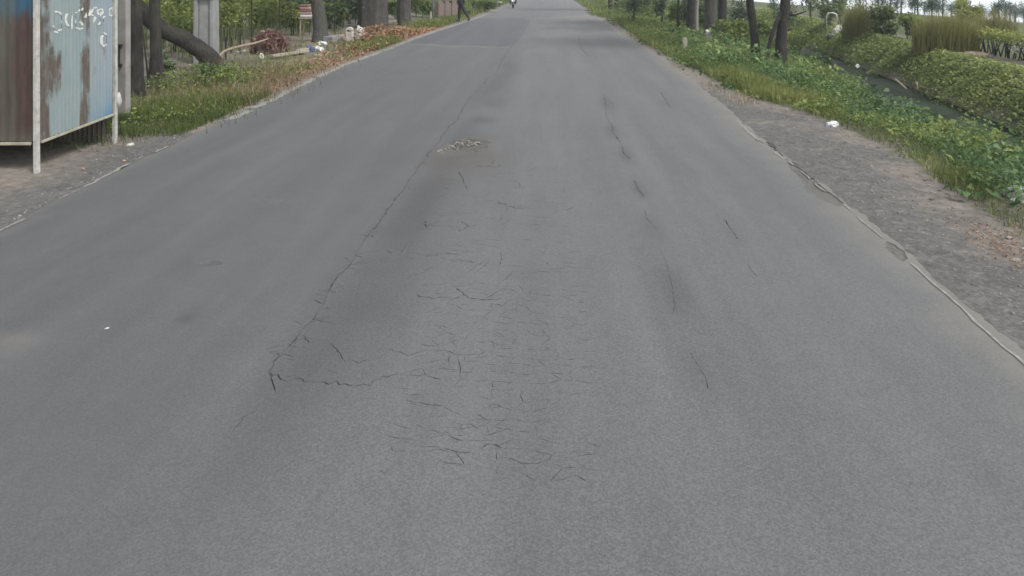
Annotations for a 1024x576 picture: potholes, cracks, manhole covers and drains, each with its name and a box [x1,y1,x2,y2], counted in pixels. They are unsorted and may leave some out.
pothole [434,139,491,158]
crack [604,96,708,388]
crack [377,161,599,482]
crack [269,341,394,386]
